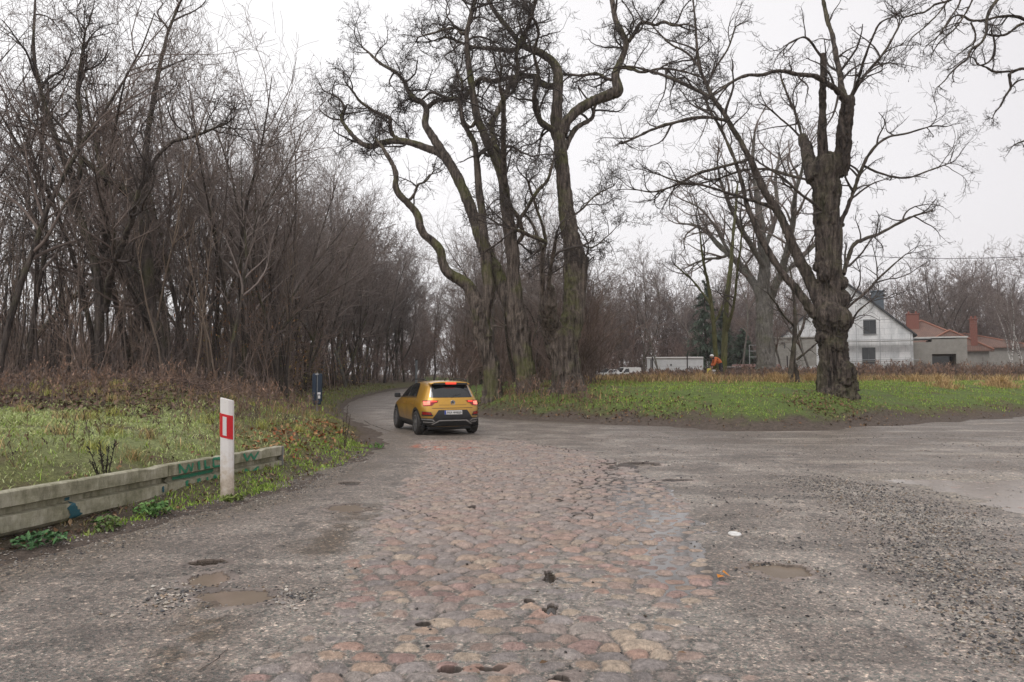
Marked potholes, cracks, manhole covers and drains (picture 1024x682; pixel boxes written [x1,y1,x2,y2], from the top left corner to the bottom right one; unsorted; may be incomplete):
pothole [611,460,671,469]
pothole [175,567,240,594]
pothole [178,585,292,610]
pothole [181,558,237,568]
pothole [319,502,374,514]
pothole [539,569,561,586]
pothole [730,559,832,582]
pothole [537,600,562,619]
